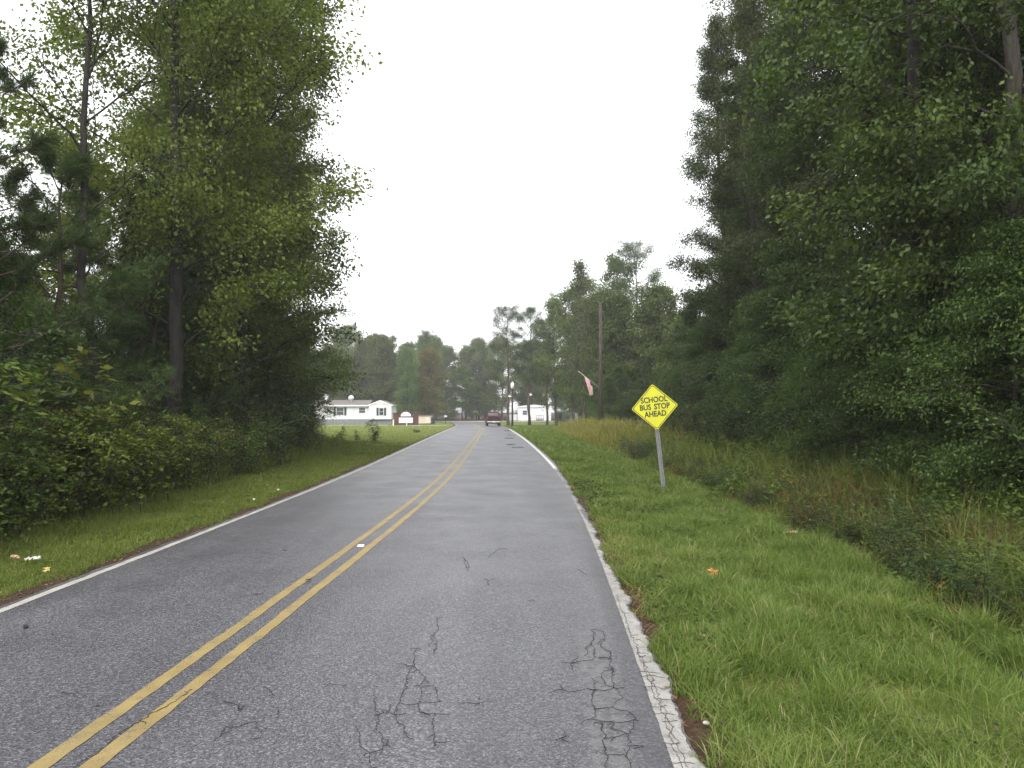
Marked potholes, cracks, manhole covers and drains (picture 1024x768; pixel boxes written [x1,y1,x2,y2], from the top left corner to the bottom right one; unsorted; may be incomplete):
crack [551,629,644,768]
crack [214,687,279,740]
crack [617,595,692,768]
crack [355,617,451,768]
